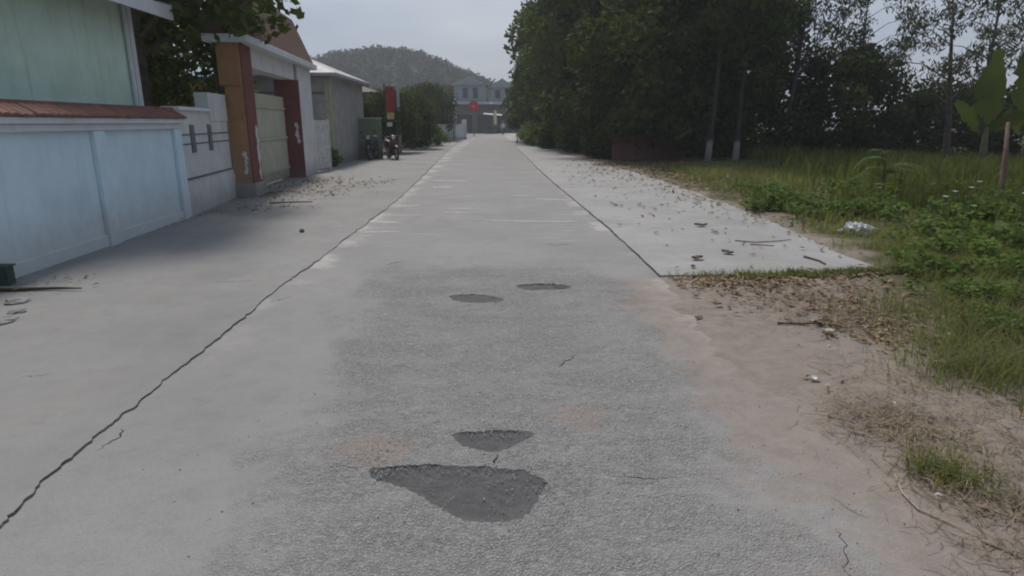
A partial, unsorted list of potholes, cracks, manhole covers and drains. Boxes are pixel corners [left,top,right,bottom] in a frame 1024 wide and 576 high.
crack [609,475,677,485]
